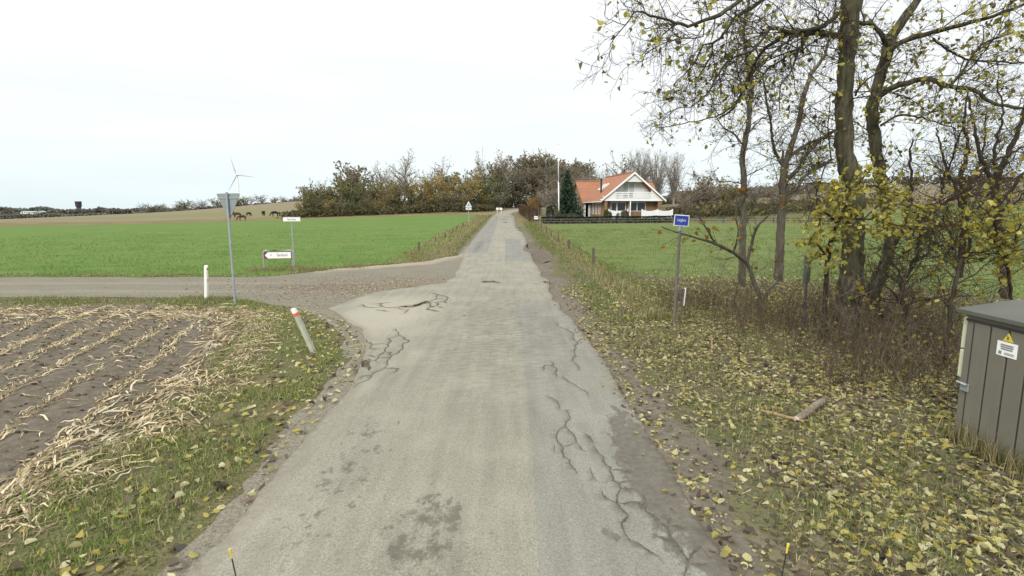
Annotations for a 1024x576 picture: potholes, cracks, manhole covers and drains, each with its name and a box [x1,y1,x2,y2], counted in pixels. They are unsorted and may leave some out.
crack [543,324,710,575]
crack [352,293,449,388]
